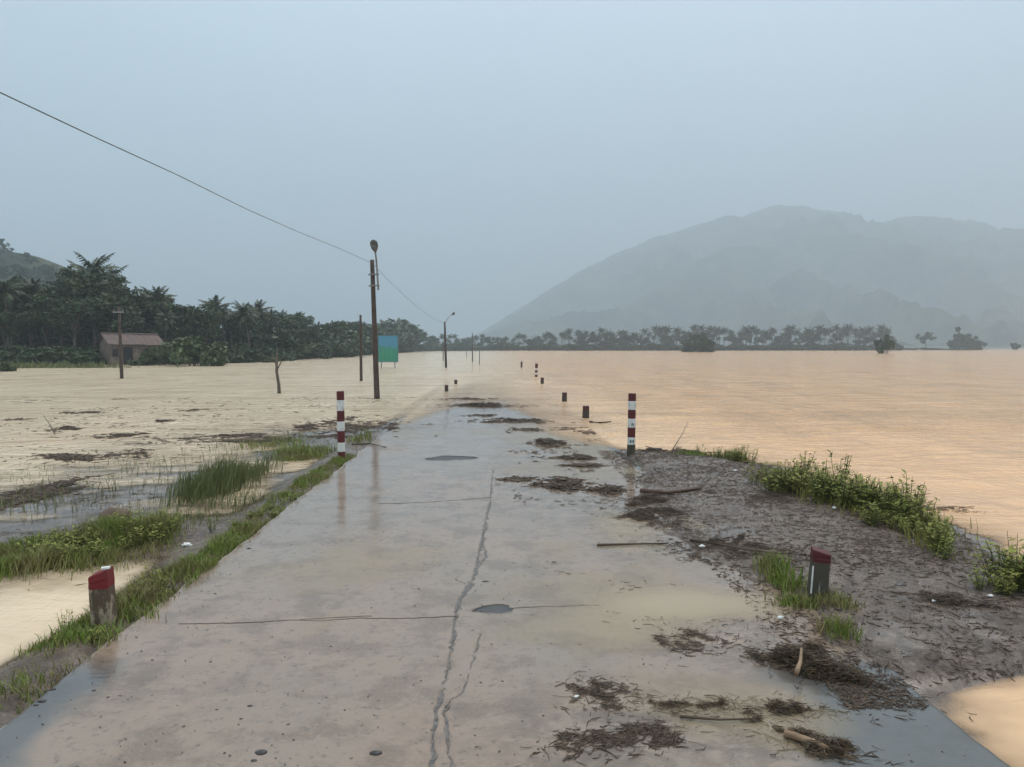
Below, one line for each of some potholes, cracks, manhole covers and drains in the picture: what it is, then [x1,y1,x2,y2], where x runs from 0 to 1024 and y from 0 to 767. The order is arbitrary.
pothole [471,604,515,614]
crack [181,470,494,767]
